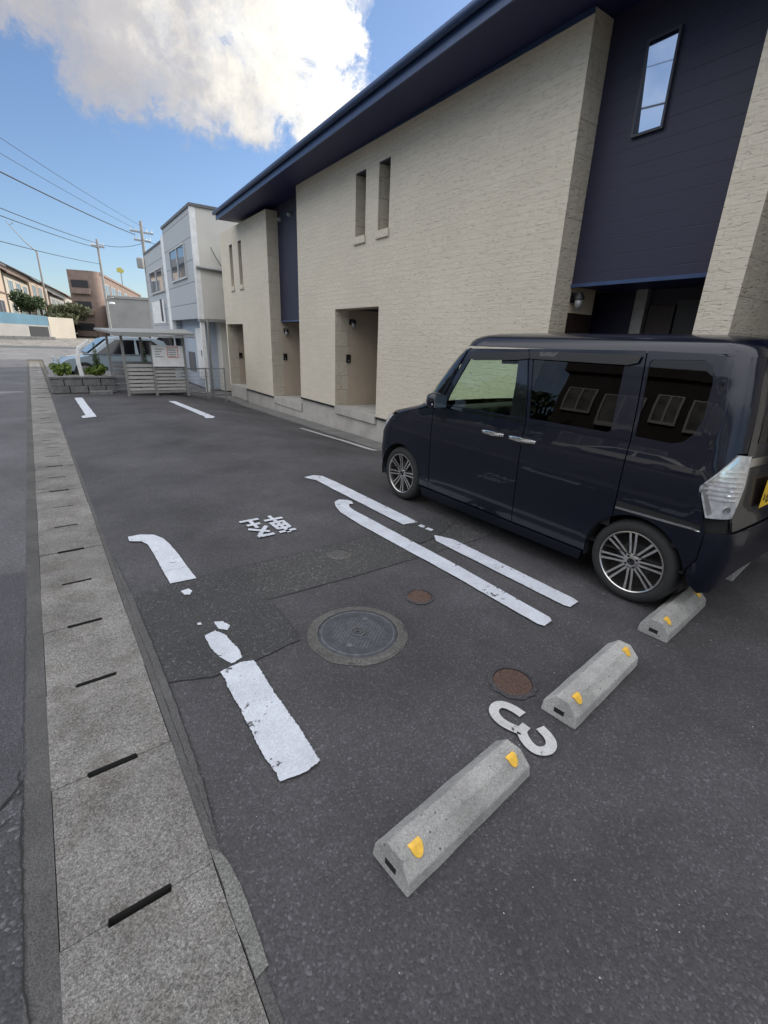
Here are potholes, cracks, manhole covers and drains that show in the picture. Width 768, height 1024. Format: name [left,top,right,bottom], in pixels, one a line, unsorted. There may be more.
crack [0,771,23,827]
manhole cover [404,589,434,604]
manhole cover [307,606,408,666]
manhole cover [487,666,538,700]
